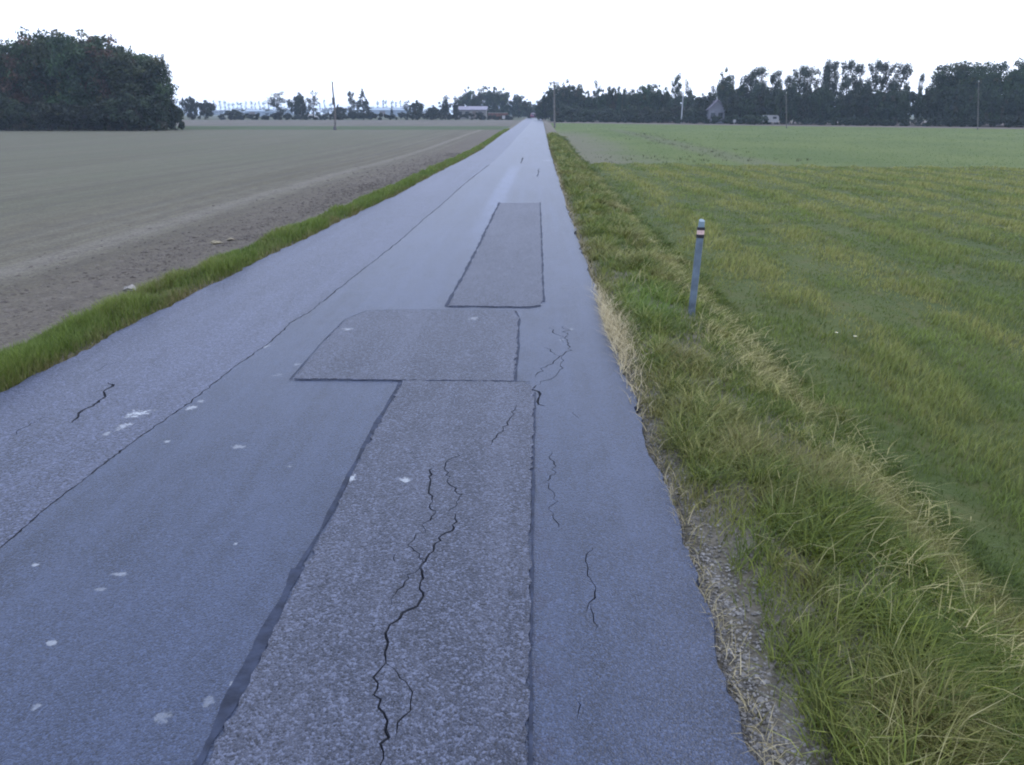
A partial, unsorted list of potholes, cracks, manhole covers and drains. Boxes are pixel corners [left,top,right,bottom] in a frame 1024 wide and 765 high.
crack [585,548,597,630]
crack [542,453,559,528]
crack [491,326,572,445]
crack [372,453,462,765]
